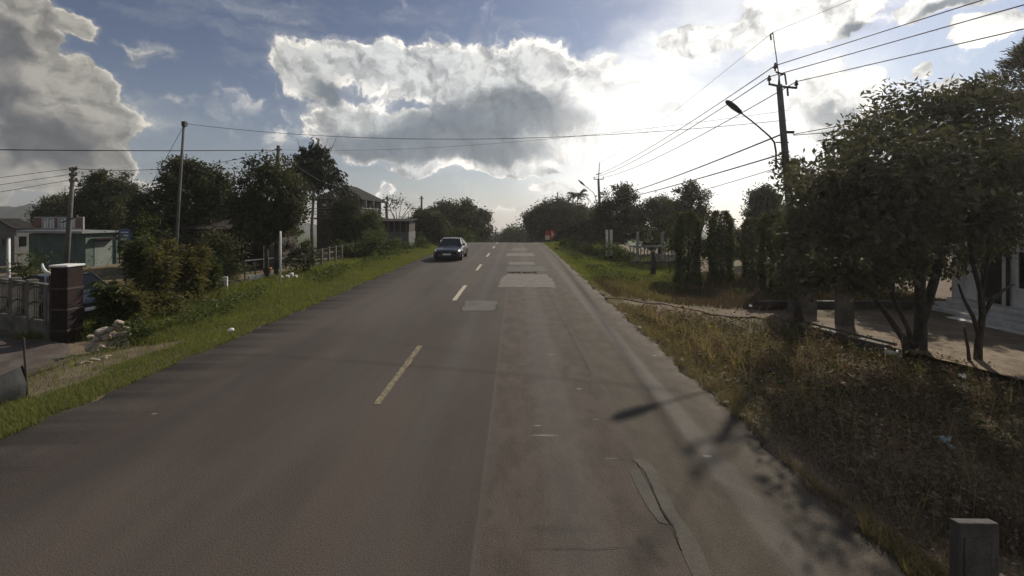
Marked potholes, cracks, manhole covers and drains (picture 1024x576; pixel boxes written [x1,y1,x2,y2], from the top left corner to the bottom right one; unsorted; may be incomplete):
crack [536,458,682,550]
